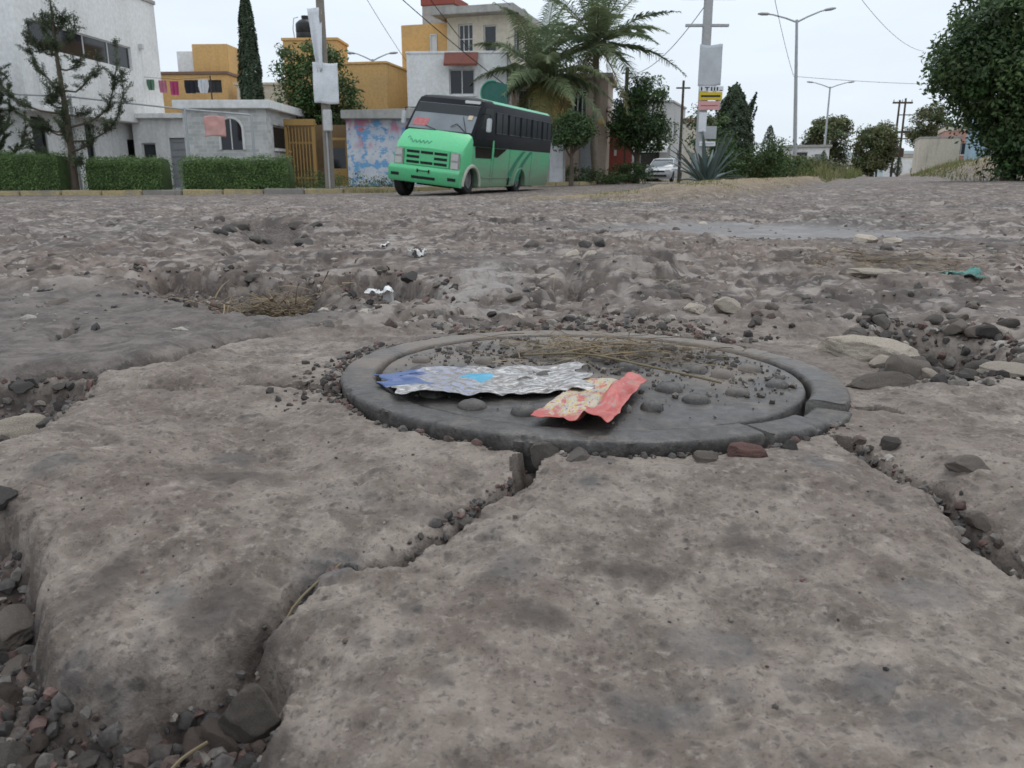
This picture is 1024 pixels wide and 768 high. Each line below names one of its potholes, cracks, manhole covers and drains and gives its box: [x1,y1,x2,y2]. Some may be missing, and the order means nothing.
crack [233,452,544,679]
crack [0,323,1024,581]
pothole [135,266,334,317]
manhole cover [340,330,852,474]
